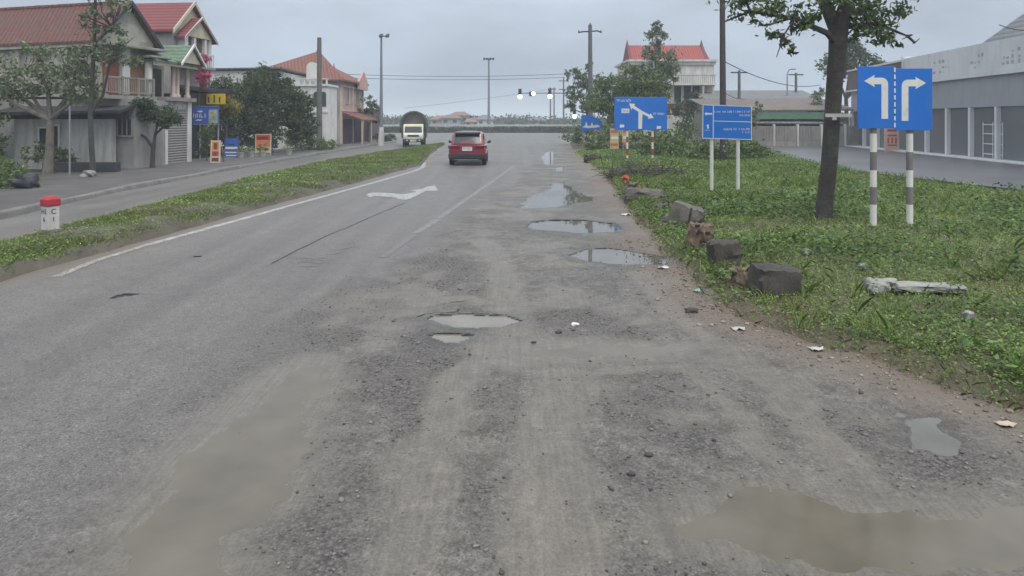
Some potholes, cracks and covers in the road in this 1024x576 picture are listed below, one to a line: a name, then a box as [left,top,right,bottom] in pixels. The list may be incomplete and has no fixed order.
pothole [517,218,632,235]
pothole [559,246,681,267]
pothole [419,331,481,346]
crack [271,203,403,267]
pothole [412,311,537,331]
